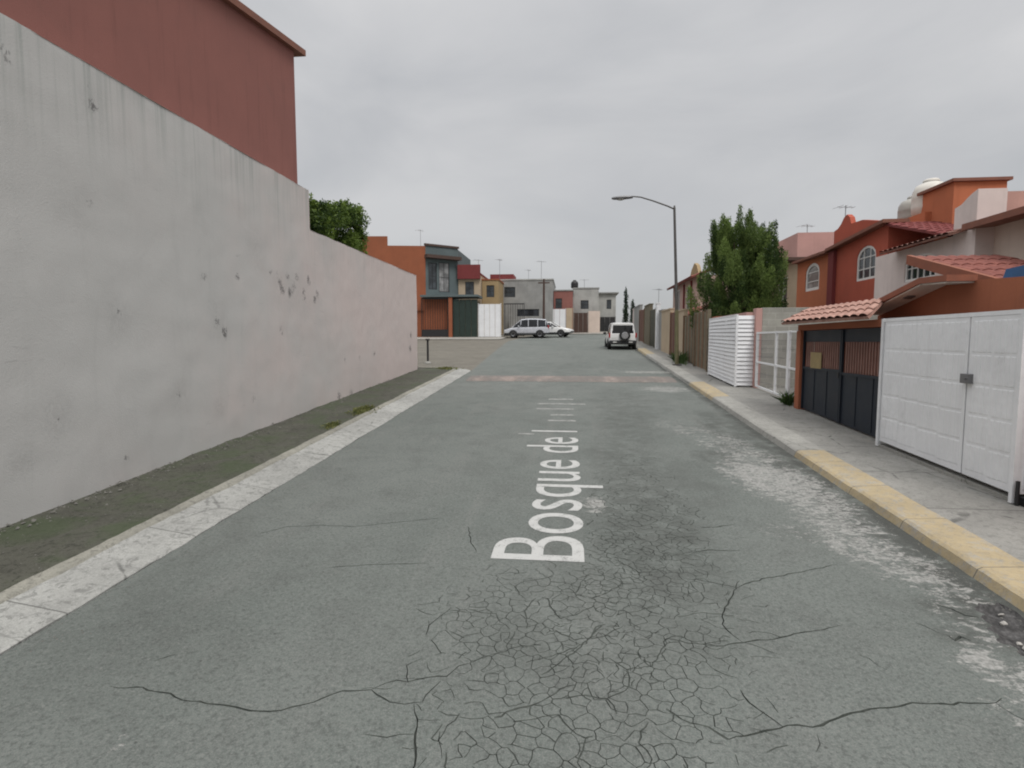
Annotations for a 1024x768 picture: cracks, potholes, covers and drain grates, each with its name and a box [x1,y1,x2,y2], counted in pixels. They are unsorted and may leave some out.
crack [110,451,1024,768]
